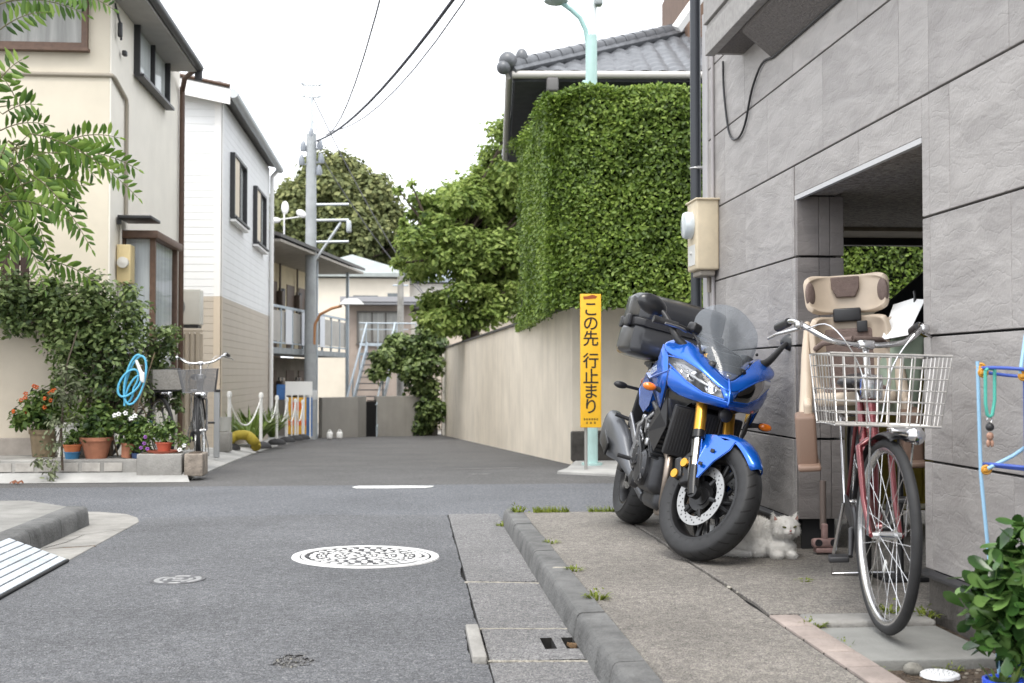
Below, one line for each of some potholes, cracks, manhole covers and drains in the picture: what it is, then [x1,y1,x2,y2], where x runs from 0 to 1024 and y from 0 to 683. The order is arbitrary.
drain grate [465,624,588,664]
manhole cover [150,575,206,584]
pothole [271,653,315,668]
manhole cover [291,545,439,568]
